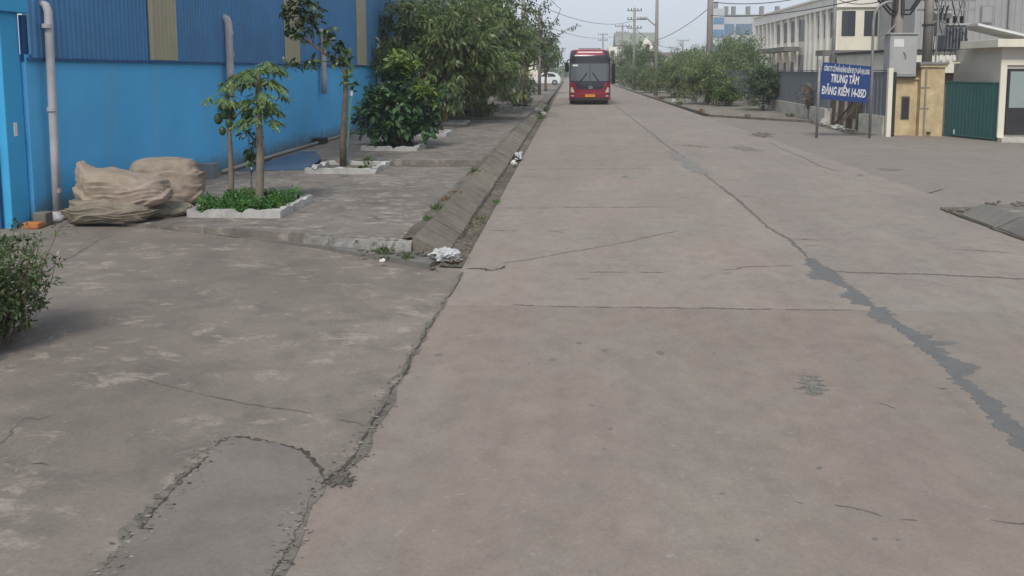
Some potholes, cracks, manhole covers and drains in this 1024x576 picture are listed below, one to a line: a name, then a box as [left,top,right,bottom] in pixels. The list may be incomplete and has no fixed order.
pothole [794,375,831,396]
crack [85,231,677,576]
crack [0,416,47,443]
